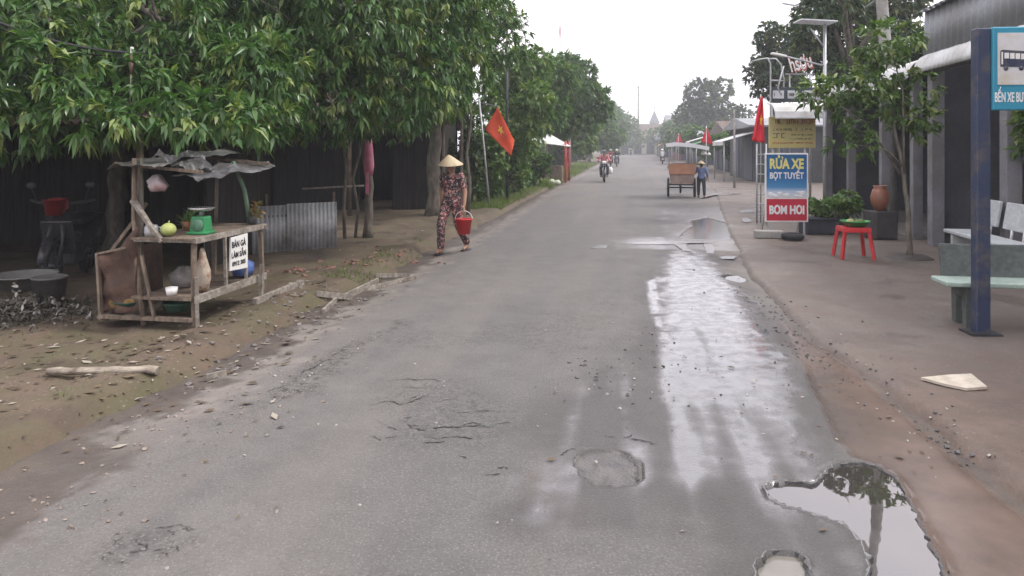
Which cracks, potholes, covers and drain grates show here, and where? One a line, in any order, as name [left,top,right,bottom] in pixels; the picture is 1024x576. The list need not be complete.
pothole [573,447,642,488]
crack [372,368,510,443]
pothole [753,548,814,576]
crack [102,524,215,562]
pothole [763,461,950,576]
pothole [678,218,733,240]
